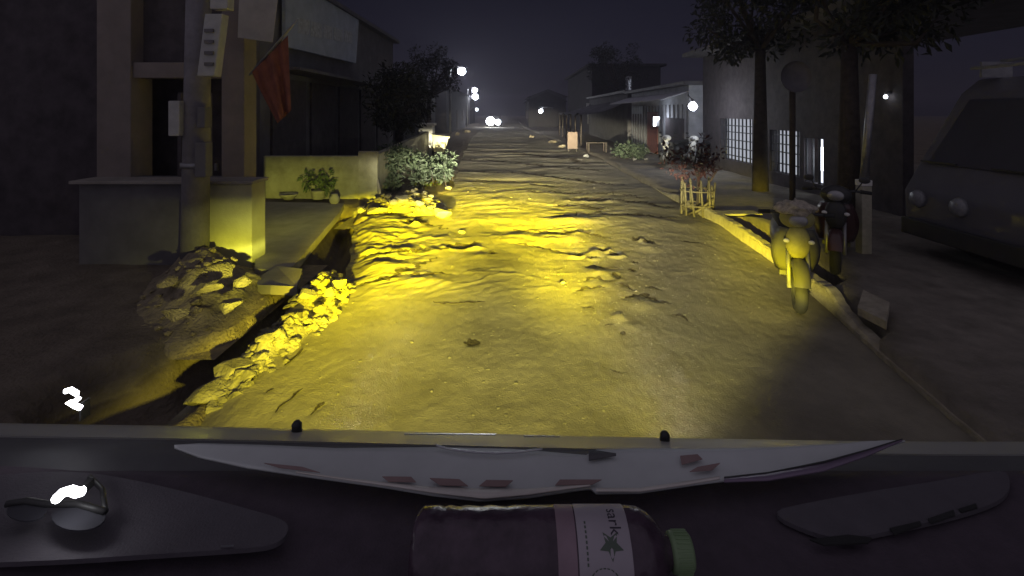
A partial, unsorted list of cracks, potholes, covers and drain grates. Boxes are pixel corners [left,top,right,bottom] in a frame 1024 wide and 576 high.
crack [460,151,674,254]
crack [267,388,325,415]
crack [577,265,688,326]
